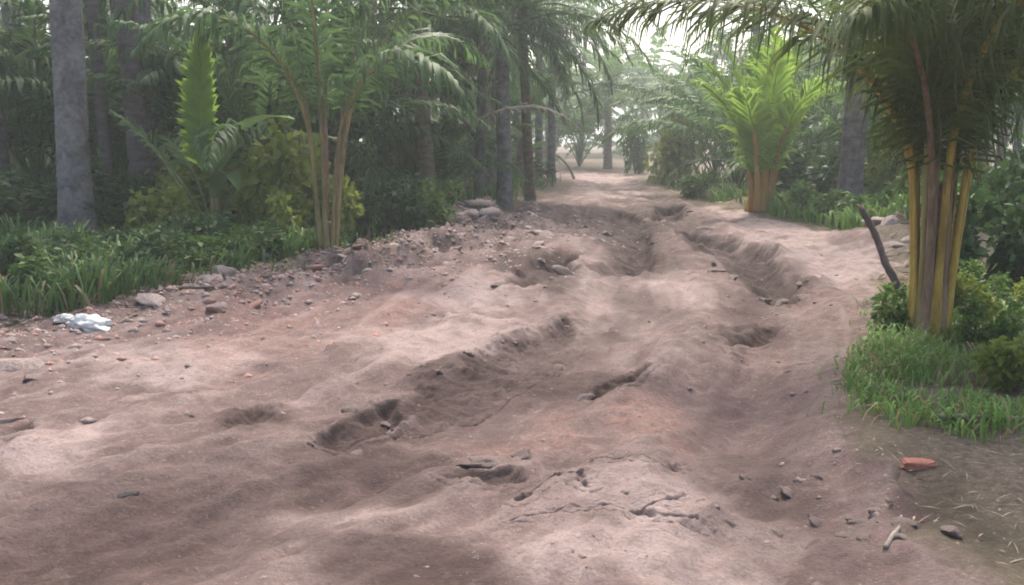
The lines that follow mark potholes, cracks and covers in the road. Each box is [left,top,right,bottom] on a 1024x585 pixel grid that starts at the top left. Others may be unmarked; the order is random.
crack [494,450,719,537]
pothole [671,227,818,308]
pothole [703,315,798,360]
pothole [500,246,588,288]
pothole [299,396,416,456]
pothole [427,461,537,492]
pothole [214,402,293,430]
pothole [578,357,665,406]
pothole [646,203,693,223]
